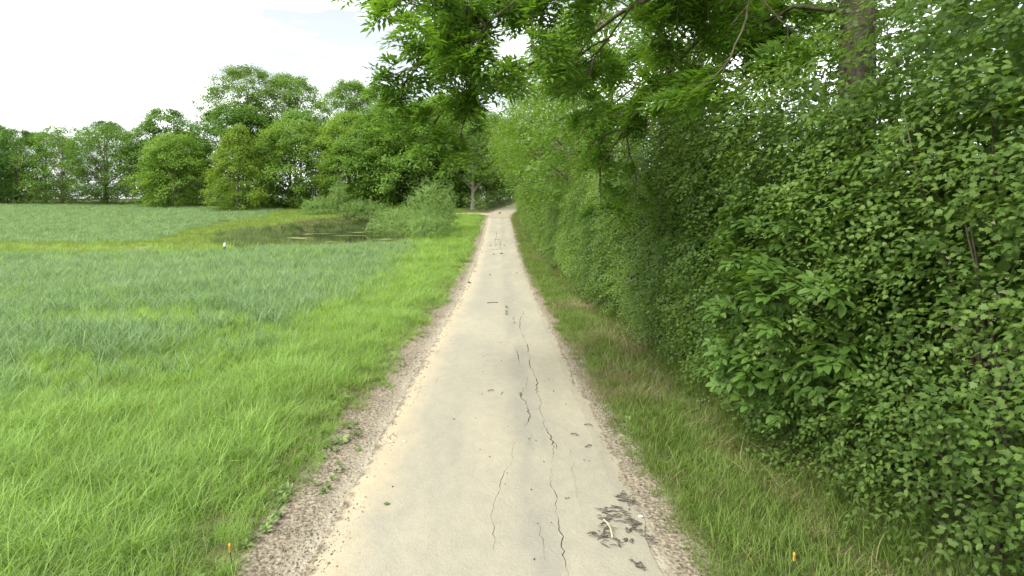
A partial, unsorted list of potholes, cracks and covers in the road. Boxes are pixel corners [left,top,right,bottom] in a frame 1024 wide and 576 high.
crack [506,306,583,576]
